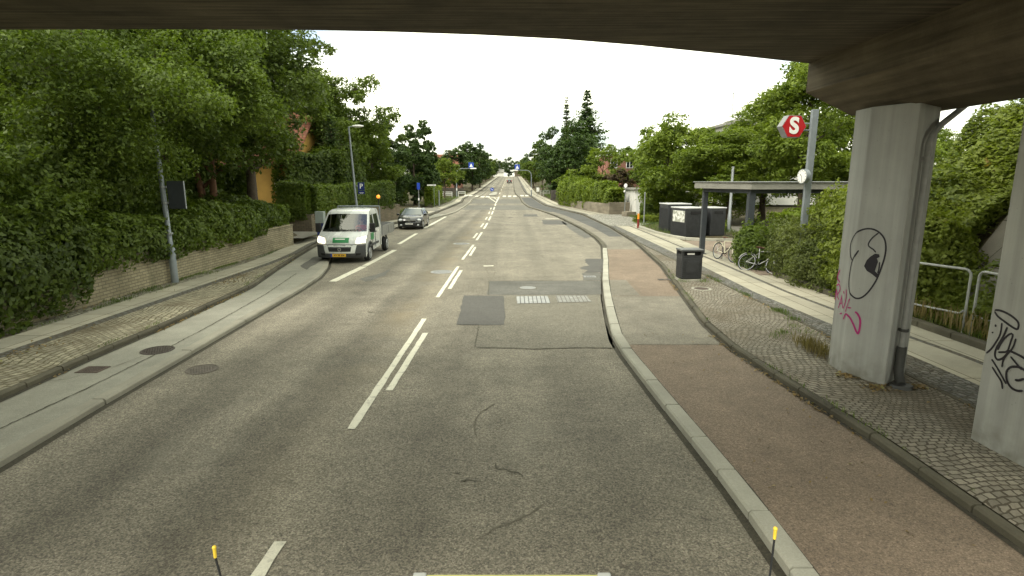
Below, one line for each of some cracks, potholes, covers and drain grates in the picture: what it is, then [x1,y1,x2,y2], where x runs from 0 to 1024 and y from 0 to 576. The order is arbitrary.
manhole cover [185,364,219,374]
manhole cover [139,345,175,355]
crack [453,463,523,482]
crack [477,504,543,539]
